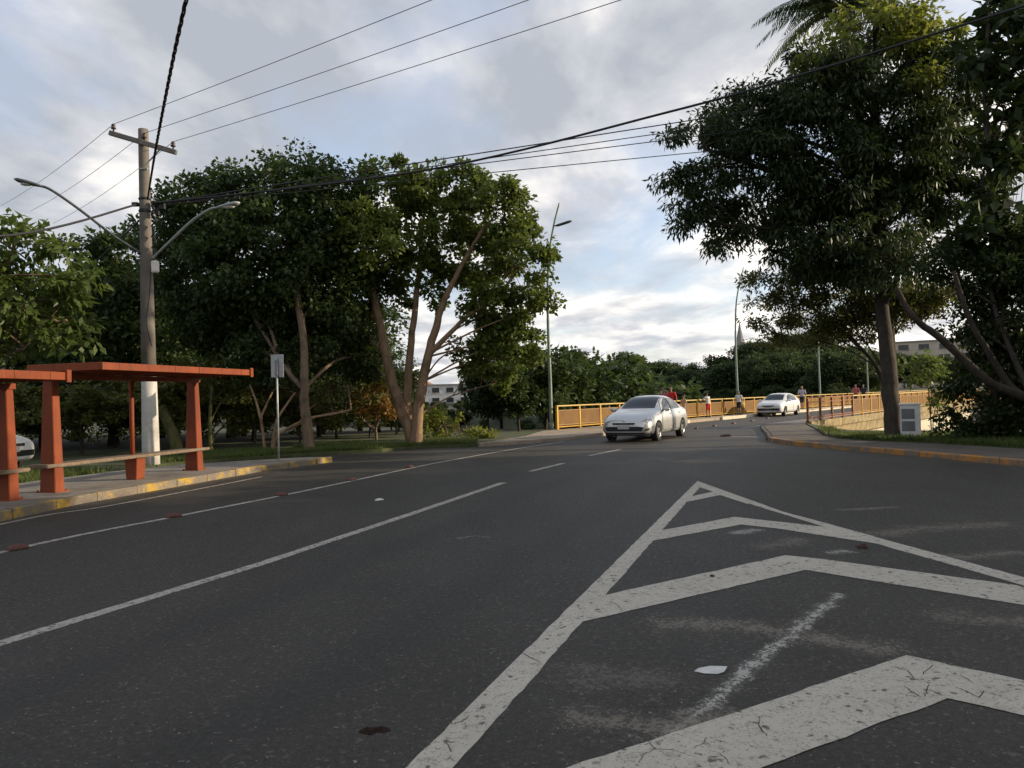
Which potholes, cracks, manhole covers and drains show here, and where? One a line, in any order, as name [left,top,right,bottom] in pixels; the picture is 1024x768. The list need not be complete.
pothole [359,726,391,736]
crack [898,665,984,698]
